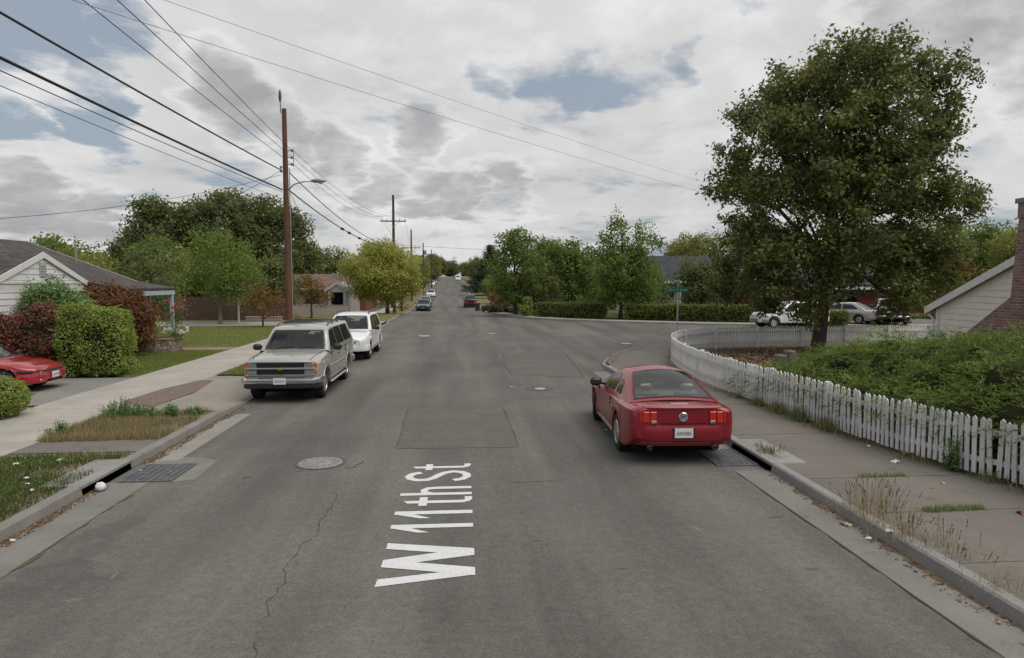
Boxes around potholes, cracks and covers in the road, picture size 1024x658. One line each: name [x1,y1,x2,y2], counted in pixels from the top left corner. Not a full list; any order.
crack [253,481,356,658]
drain grate [39,459,196,494]
drain grate [696,439,807,474]
manhole cover [295,456,346,470]
